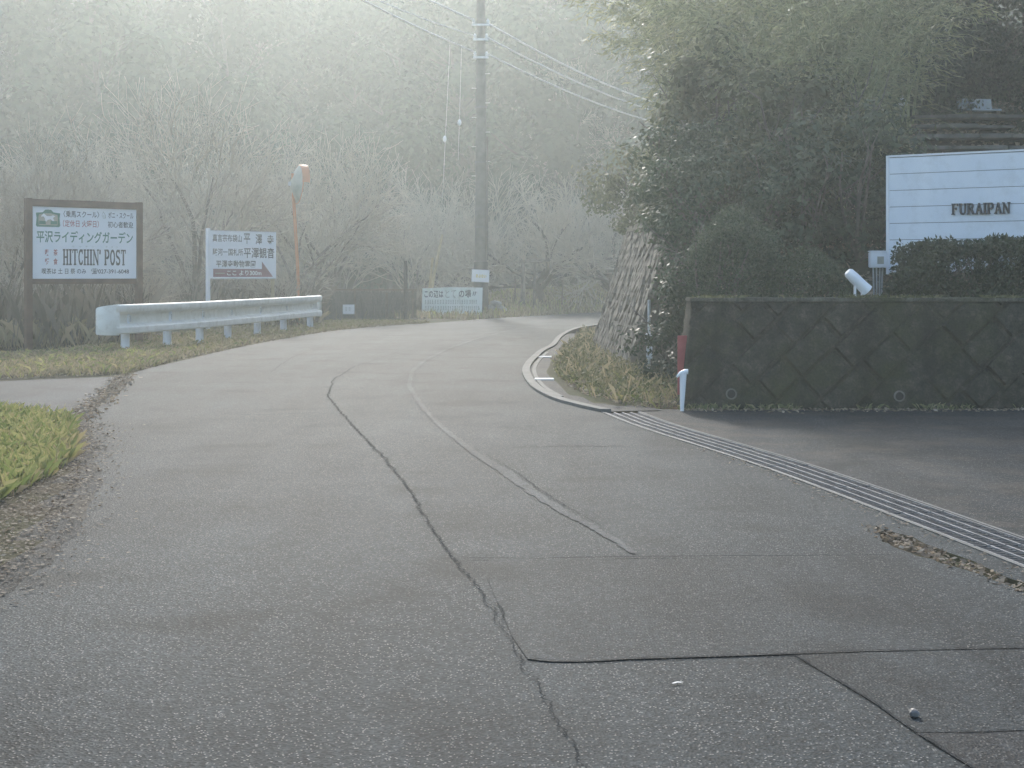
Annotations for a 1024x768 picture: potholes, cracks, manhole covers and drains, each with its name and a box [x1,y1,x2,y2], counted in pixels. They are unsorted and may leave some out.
drain grate [891,511,1024,548]
pothole [872,525,1024,592]
drain grate [765,465,869,488]
drain grate [713,448,807,467]
drain grate [822,486,943,514]
crack [240,350,1024,768]
drain grate [975,545,1024,565]
drain grate [605,412,665,424]
drain grate [632,422,703,436]
drain grate [668,434,752,450]
